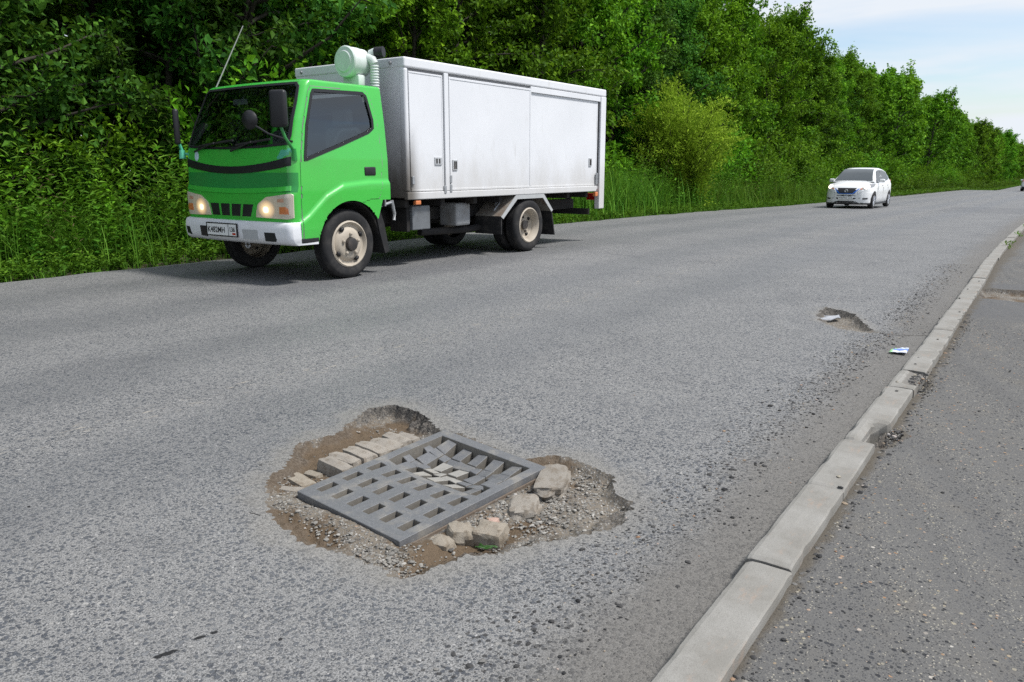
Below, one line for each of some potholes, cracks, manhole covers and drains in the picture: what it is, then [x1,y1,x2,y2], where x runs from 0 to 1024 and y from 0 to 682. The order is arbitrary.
pothole [978,289,1024,303]
pothole [816,307,879,333]
drain grate [293,430,546,547]
pothole [264,405,635,579]
